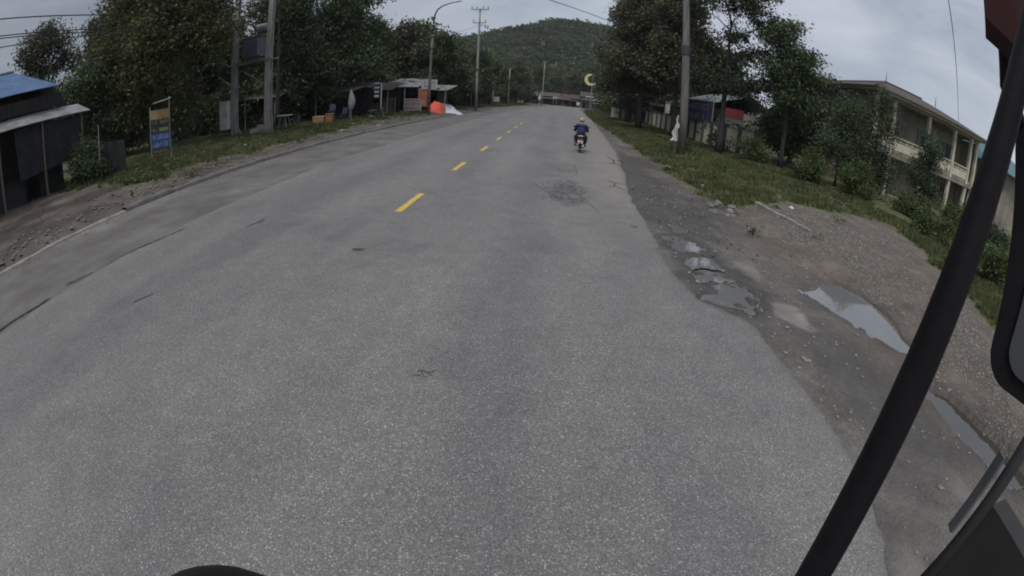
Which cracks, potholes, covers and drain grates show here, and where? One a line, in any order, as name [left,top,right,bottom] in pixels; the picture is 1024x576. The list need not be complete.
pothole [658,234,710,255]
crack [534,166,599,212]
pothole [680,252,728,272]
pothole [690,270,772,318]
